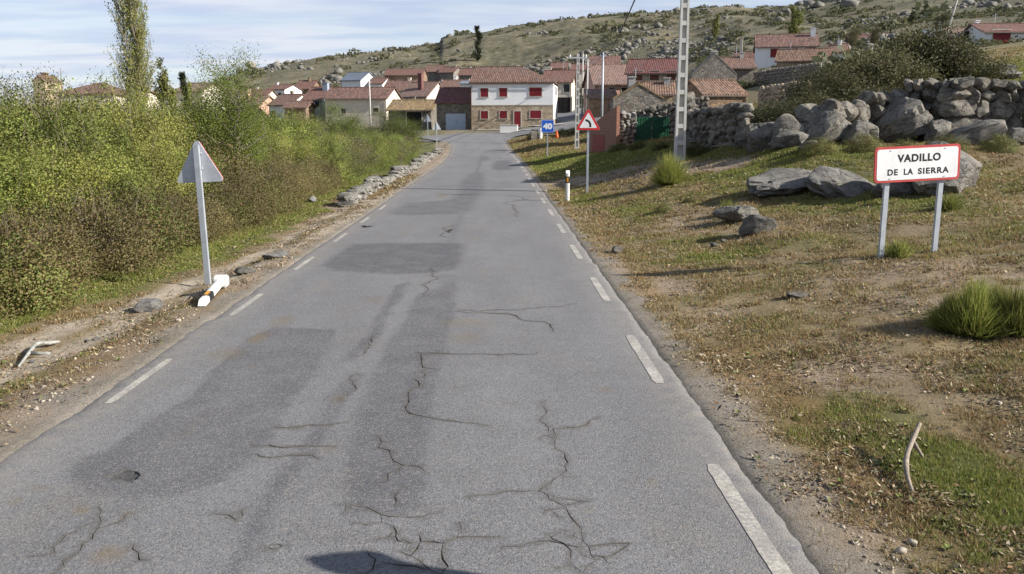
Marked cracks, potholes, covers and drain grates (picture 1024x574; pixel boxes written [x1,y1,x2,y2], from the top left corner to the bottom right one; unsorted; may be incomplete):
pothole [106,470,140,482]
crack [470,408,629,572]
crack [43,507,126,571]
crack [347,437,482,574]
crack [467,304,569,329]
crack [405,352,532,425]
